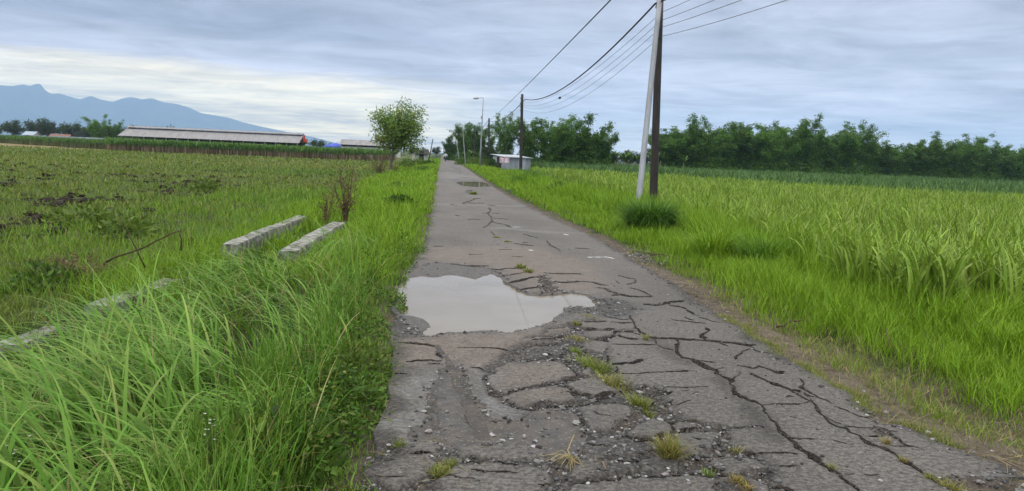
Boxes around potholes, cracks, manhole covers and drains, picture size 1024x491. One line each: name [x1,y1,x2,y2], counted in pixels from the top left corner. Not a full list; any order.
crack [386,177,937,491]
pothole [395,263,597,336]
